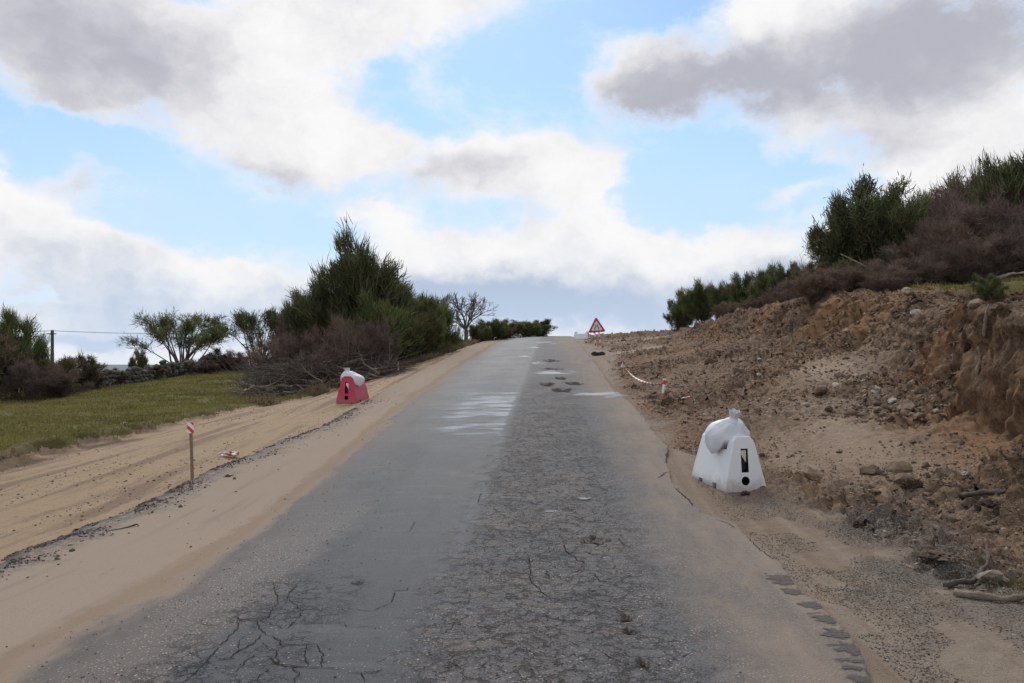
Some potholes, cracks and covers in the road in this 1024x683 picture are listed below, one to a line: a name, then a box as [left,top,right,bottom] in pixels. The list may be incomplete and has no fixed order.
crack [507,500,631,634]
crack [181,582,444,683]
